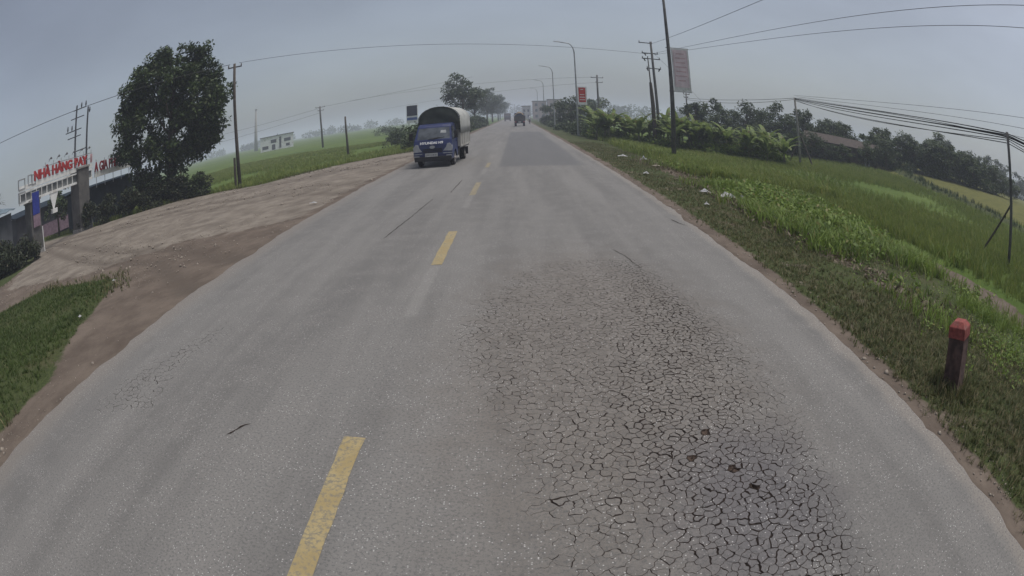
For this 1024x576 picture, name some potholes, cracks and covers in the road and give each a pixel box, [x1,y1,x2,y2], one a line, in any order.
crack [445,259,879,576]
crack [98,328,227,413]
